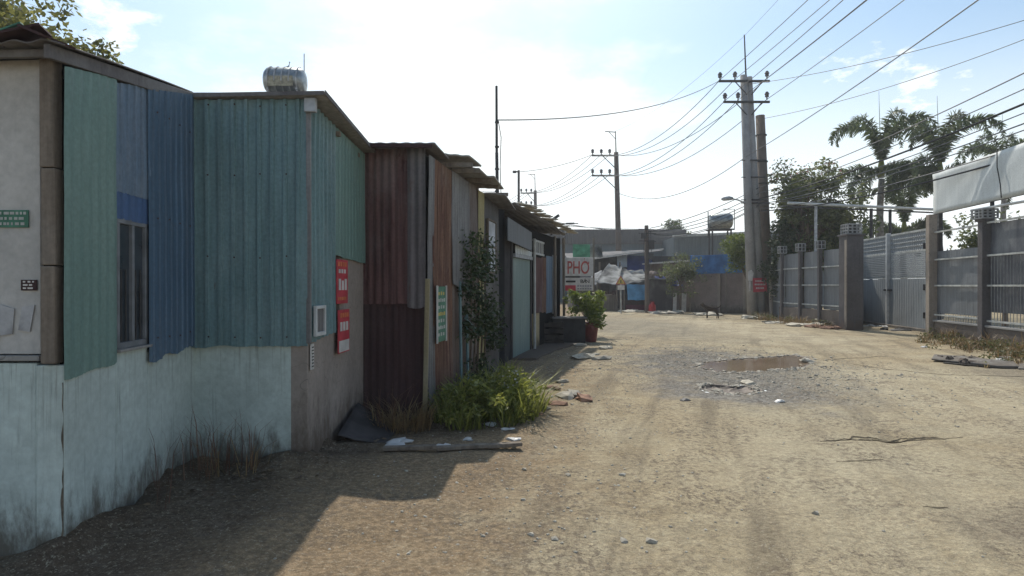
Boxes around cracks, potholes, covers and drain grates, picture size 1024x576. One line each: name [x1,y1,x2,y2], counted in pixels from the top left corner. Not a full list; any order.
crack [827,436,960,462]
pothole [685,353,818,374]
